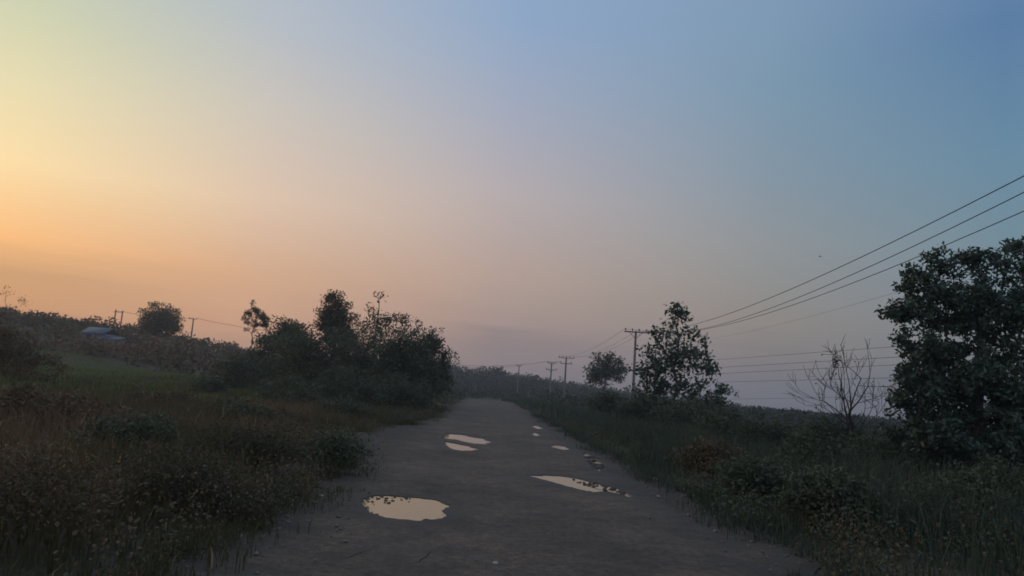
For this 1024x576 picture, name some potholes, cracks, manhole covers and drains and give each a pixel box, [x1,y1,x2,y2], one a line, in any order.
pothole [528,474,635,497]
pothole [586,460,606,471]
pothole [440,434,491,444]
pothole [360,495,450,521]
pothole [444,441,481,451]
